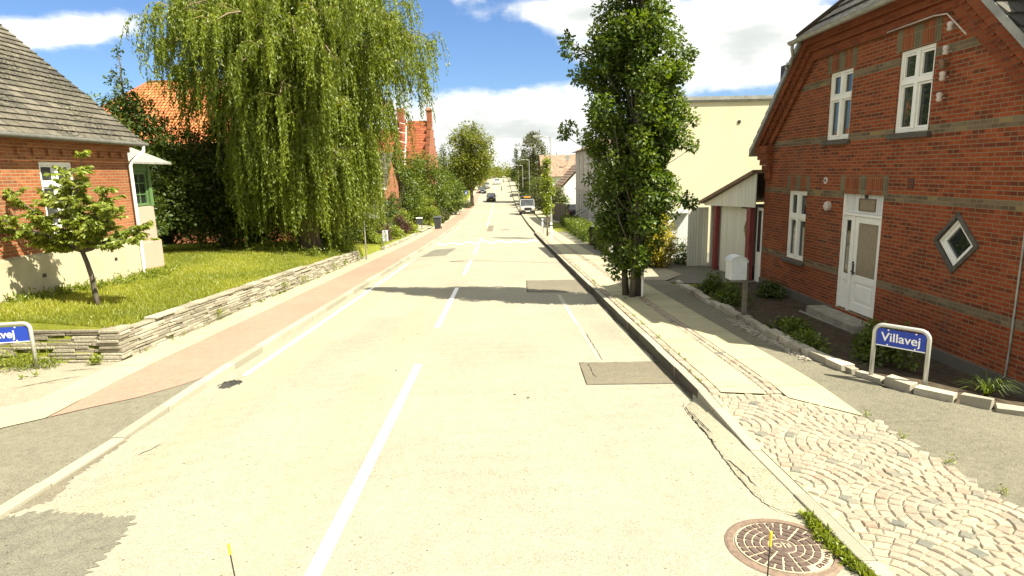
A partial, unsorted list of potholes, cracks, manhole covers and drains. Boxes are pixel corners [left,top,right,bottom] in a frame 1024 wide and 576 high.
manhole cover [724,518,844,576]
pothole [217,379,243,389]
crack [683,404,799,515]
